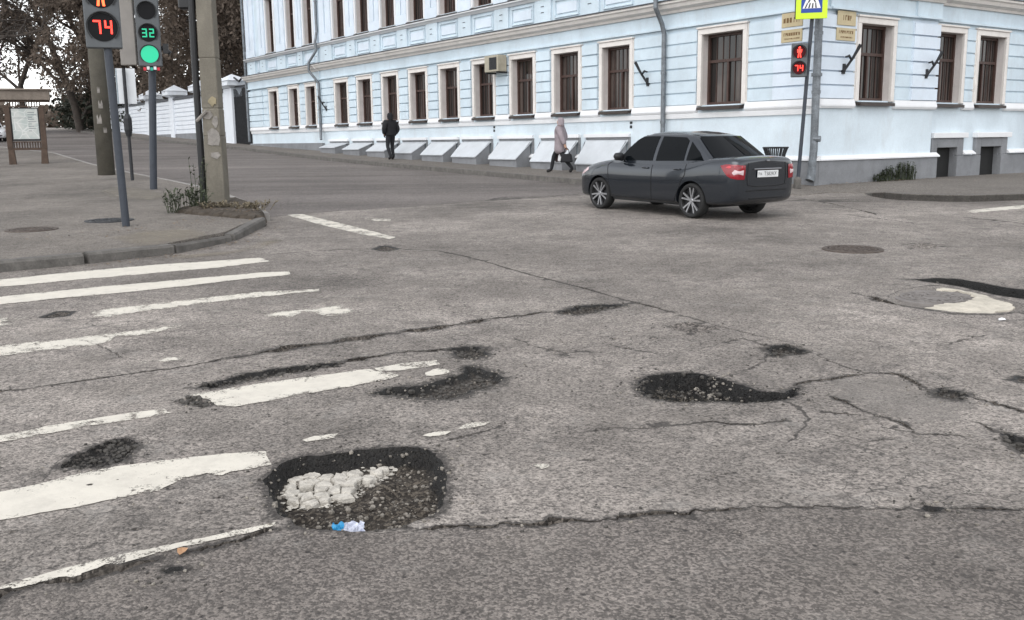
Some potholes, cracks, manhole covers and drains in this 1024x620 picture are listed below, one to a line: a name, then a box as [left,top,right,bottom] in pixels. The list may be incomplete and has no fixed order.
crack [858,294,961,313]
pothole [1000,433,1024,454]
crack [0,312,547,392]
crack [682,404,794,425]
pothole [558,303,622,315]
pothole [60,438,140,469]
pothole [933,388,969,400]
manhole cover [822,245,884,254]
pothole [766,344,809,357]
crack [975,398,1024,431]
manhole cover [895,290,974,307]
crack [793,353,960,442]
